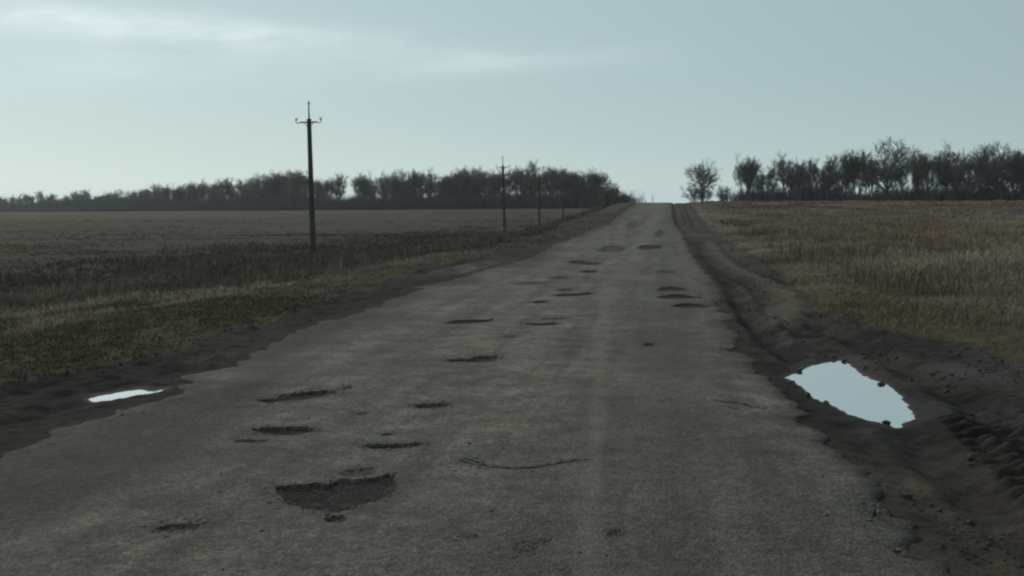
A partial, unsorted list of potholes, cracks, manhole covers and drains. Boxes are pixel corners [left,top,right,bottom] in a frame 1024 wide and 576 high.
pothole [258,390,337,403]
pothole [158,523,203,533]
pothole [339,467,376,477]
pothole [598,245,628,253]
pothole [275,473,398,513]
pothole [252,426,316,436]
crack [461,457,593,469]
crack [716,400,764,409]
